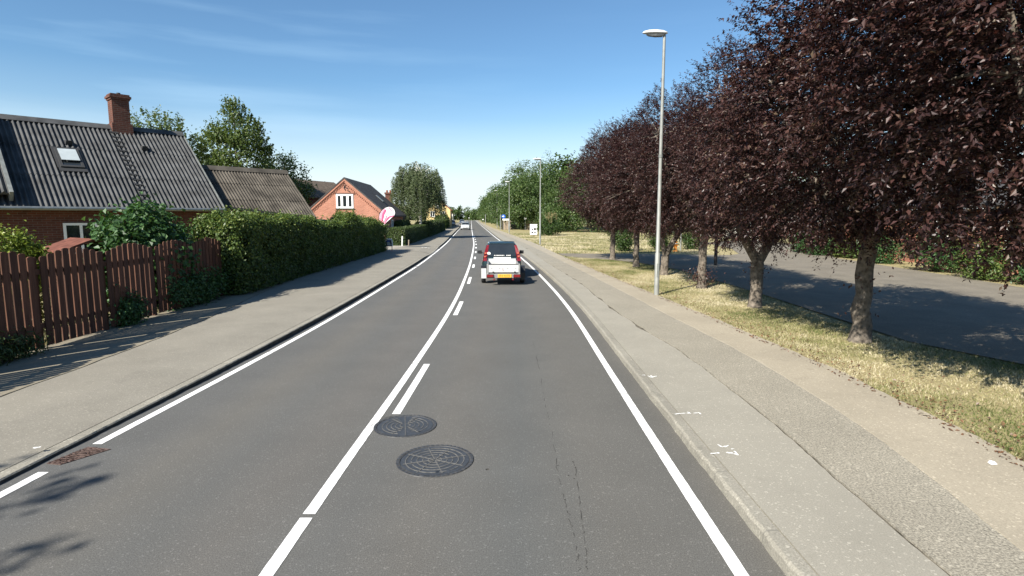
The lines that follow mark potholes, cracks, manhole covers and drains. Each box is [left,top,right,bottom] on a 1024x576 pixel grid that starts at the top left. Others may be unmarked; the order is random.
manhole cover [373,415,437,438]
drain grate [46,447,111,465]
manhole cover [395,444,474,478]
crack [533,342,588,571]
